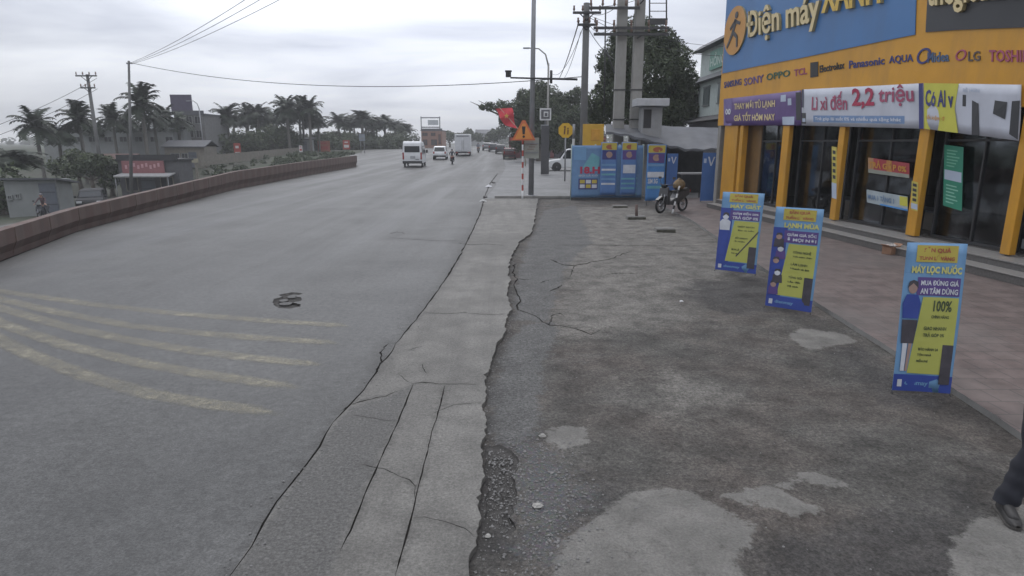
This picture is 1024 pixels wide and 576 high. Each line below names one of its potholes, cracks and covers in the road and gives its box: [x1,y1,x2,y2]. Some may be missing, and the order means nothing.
pothole [484,445,519,538]
crack [230,174,699,576]
